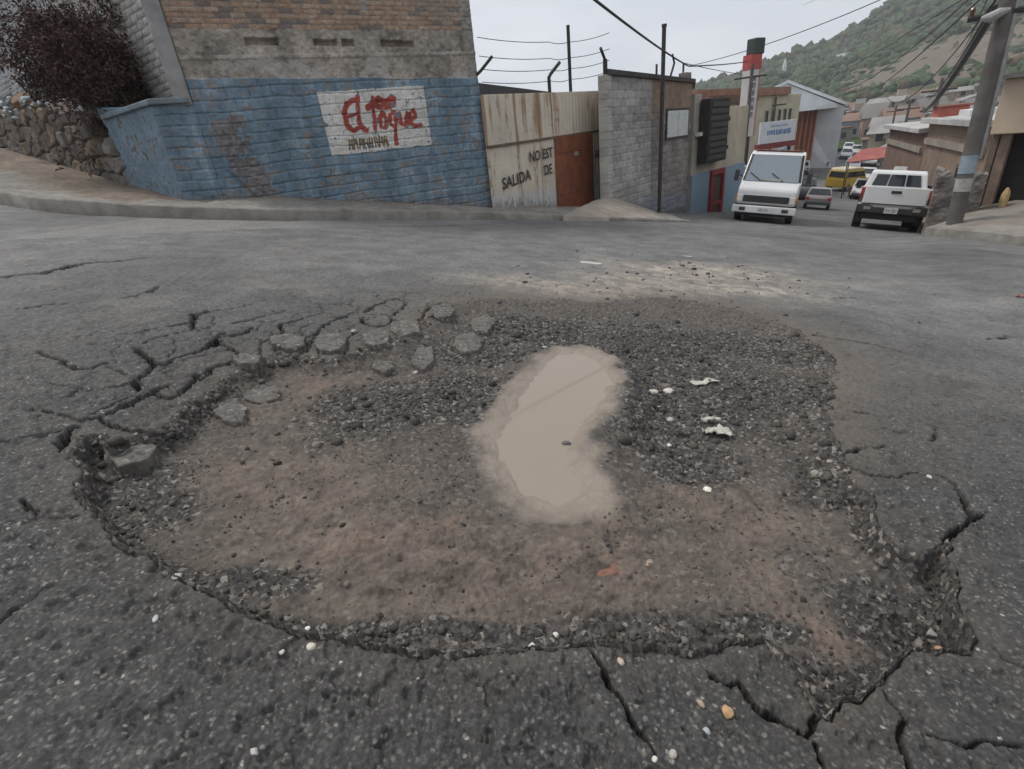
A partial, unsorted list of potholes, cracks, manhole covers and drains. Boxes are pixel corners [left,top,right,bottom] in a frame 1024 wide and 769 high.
crack [590,649,655,756]
pothole [61,297,977,723]
crack [738,687,823,769]
crack [884,694,908,769]
crack [945,499,981,542]
